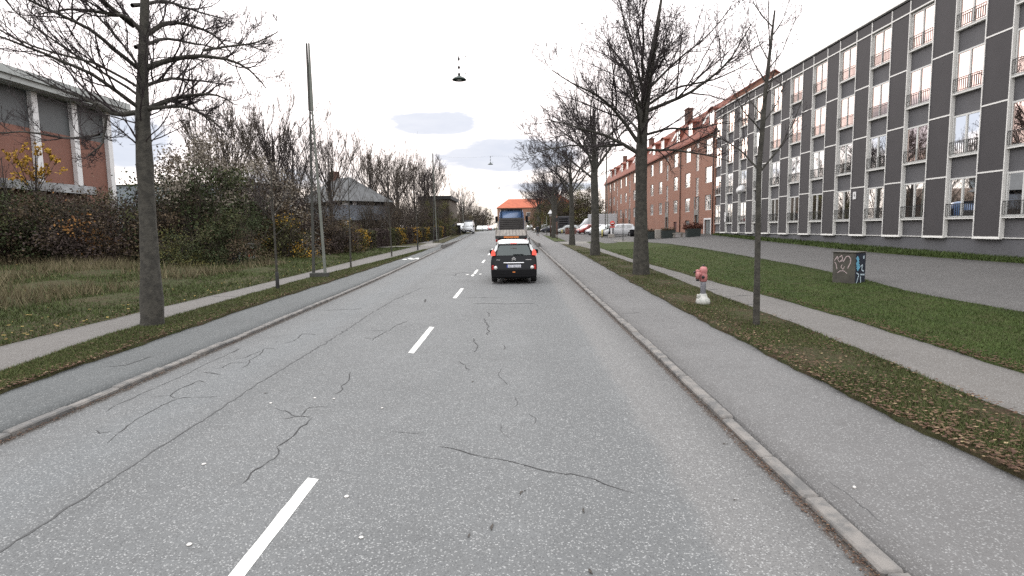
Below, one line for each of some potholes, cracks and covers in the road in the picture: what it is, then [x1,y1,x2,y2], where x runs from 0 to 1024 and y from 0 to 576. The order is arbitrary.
crack [439,446,633,493]
crack [243,373,350,483]
crack [460,297,532,369]
crack [97,334,316,441]
